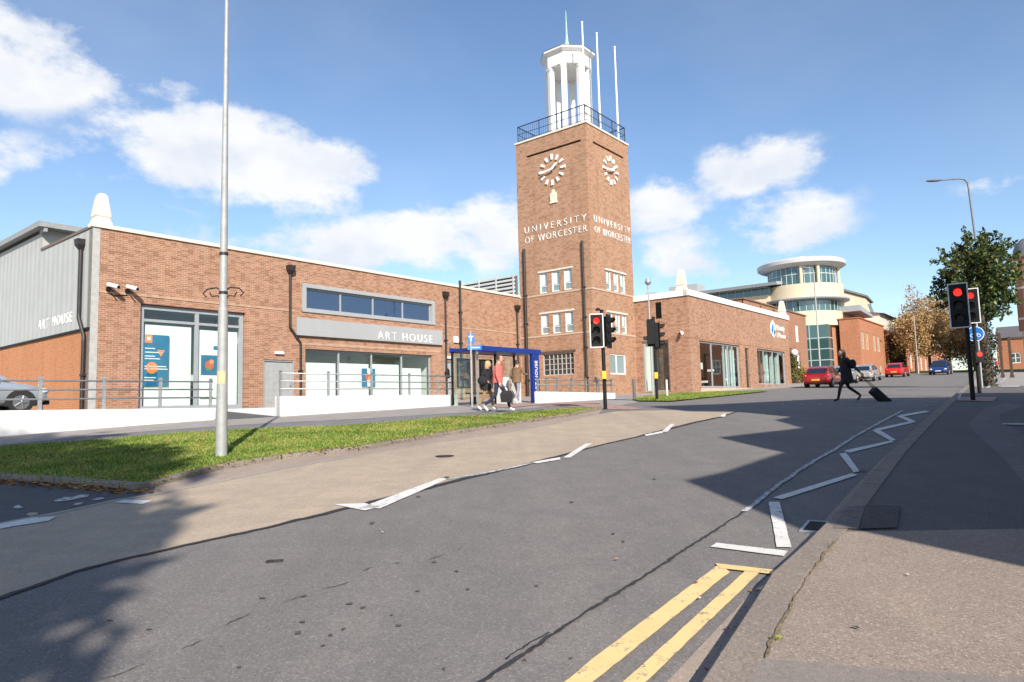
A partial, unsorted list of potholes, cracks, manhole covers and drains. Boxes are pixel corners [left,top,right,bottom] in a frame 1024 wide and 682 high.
crack [765,540,837,657]
drain grate [799,520,828,533]
utility cover [860,505,900,529]
